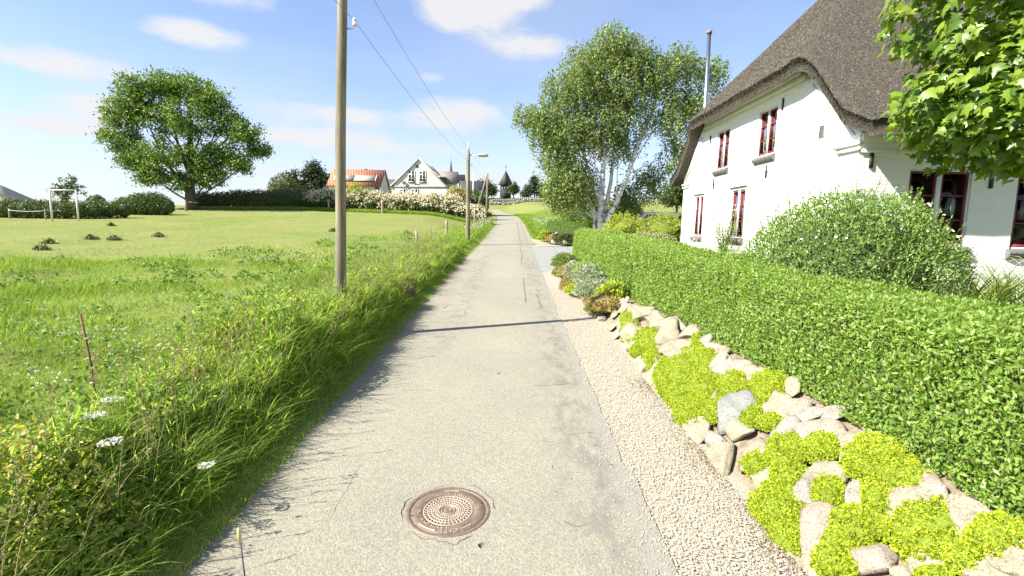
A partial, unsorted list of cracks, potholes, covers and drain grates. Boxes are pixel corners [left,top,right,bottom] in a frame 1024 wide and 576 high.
crack [401,485,496,545]
crack [517,222,552,311]
manhole cover [405,487,490,538]
